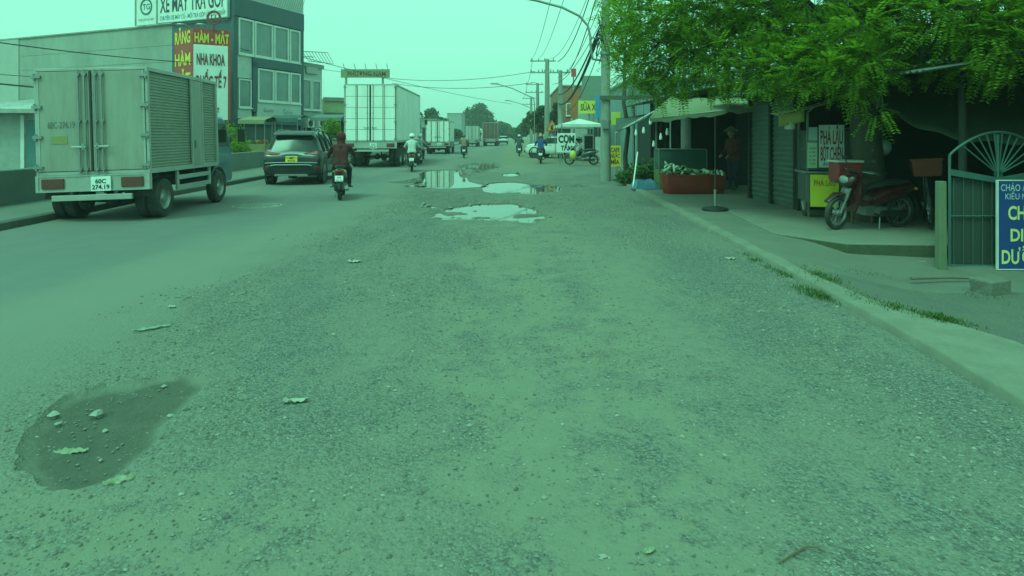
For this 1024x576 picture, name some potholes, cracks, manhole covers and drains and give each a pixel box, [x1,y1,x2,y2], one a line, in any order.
pothole [480,182,563,194]
pothole [457,162,501,176]
pothole [413,169,486,189]
pothole [423,202,552,224]
pothole [13,370,210,491]
